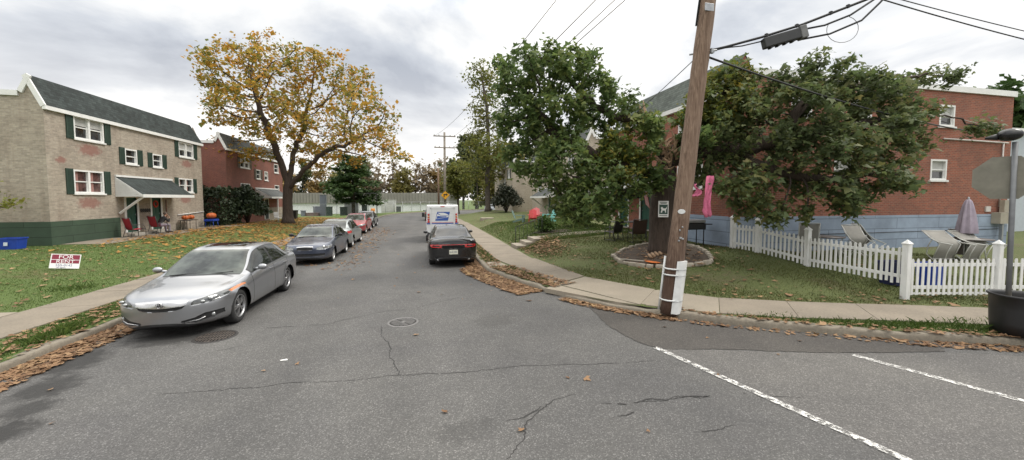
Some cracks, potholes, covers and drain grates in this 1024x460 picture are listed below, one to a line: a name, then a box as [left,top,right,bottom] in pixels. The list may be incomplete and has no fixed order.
manhole cover [387,317,419,327]
crack [505,394,572,460]
crack [166,299,641,394]
crack [610,395,799,418]
